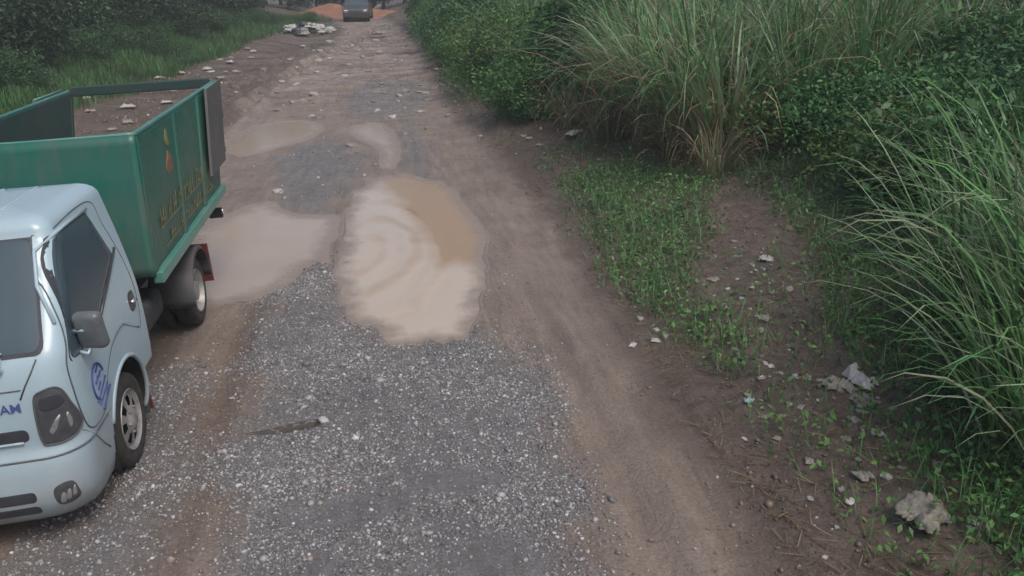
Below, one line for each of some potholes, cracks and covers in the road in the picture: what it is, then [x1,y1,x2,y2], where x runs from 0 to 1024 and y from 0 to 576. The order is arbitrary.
pothole [190,201,342,309]
pothole [332,172,491,346]
pothole [224,120,327,157]
pothole [347,122,403,169]
